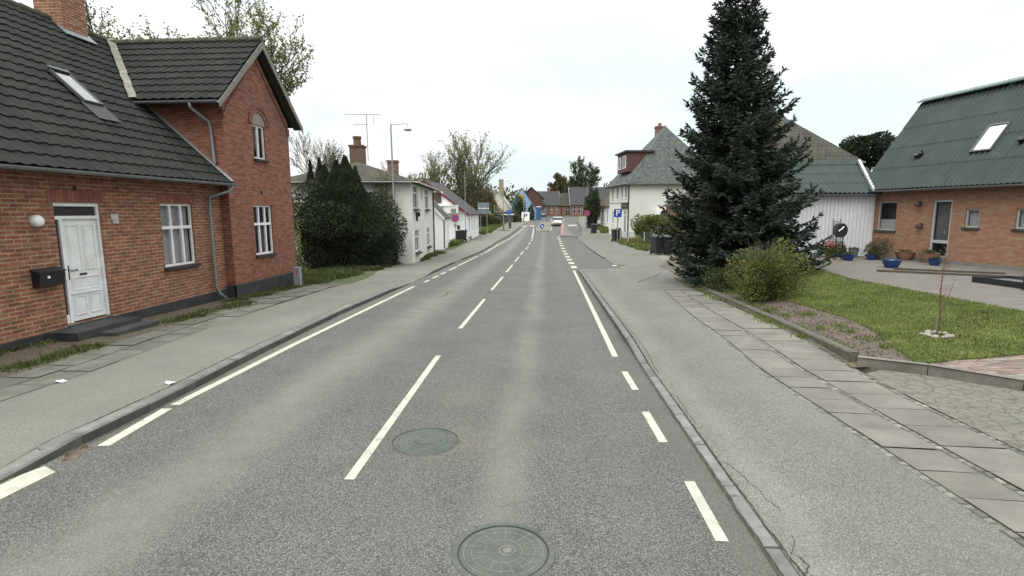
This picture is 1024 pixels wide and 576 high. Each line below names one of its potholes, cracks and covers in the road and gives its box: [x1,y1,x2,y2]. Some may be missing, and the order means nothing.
manhole cover [451,522,555,576]
pothole [60,443,90,463]
manhole cover [390,427,460,456]
